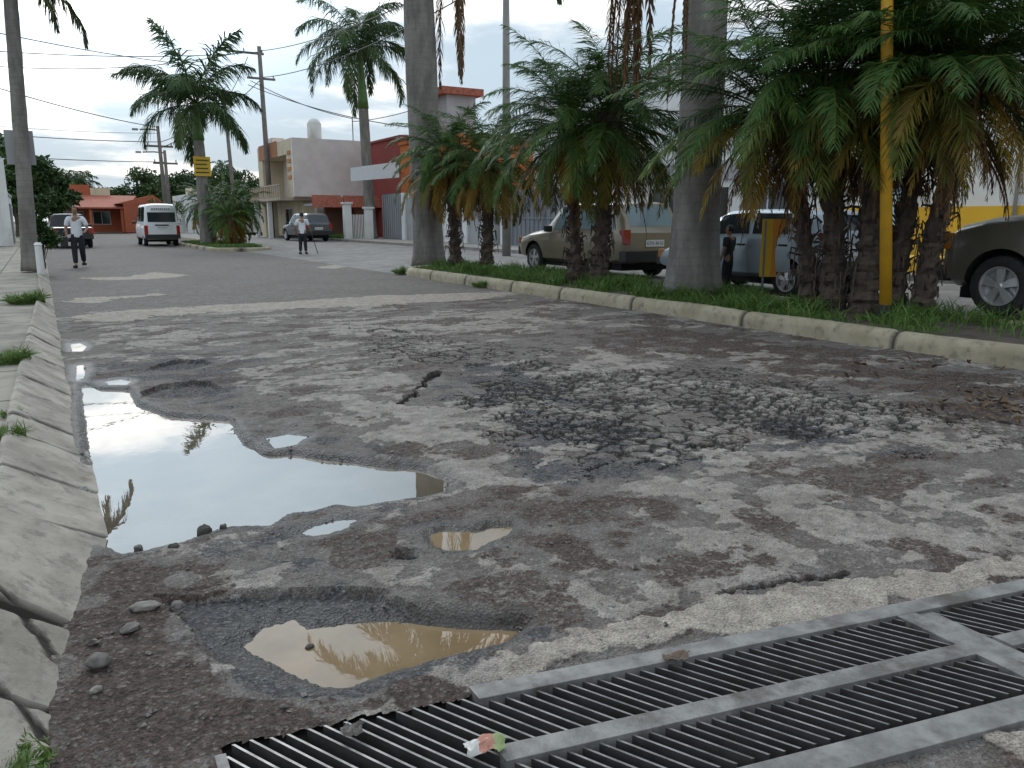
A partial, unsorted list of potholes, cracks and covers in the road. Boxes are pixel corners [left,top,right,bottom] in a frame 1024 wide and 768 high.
pothole [75,376,459,559]
crack [437,347,1024,482]
pothole [144,359,222,377]
crack [714,570,852,595]
drain grate [214,603,1024,768]
crack [356,327,510,405]
pothole [423,523,516,557]
drain grate [898,579,1024,663]
pothole [153,586,561,704]
